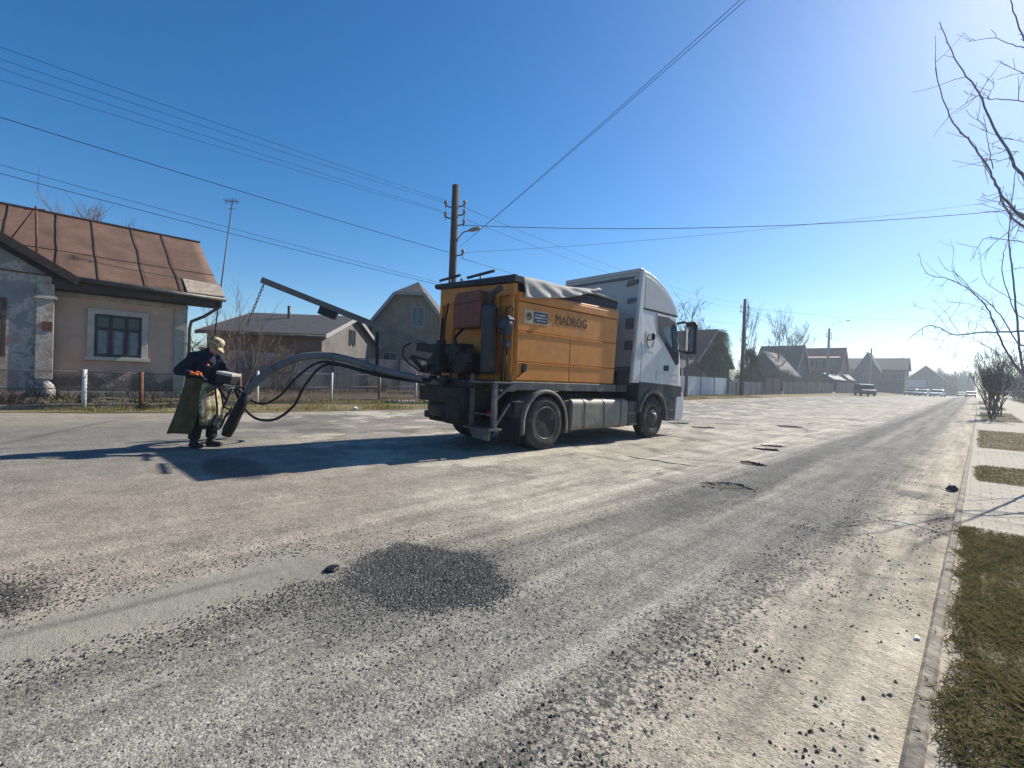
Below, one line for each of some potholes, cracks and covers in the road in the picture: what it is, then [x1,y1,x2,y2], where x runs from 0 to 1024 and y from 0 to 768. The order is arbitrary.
pothole [698,481,757,492]
